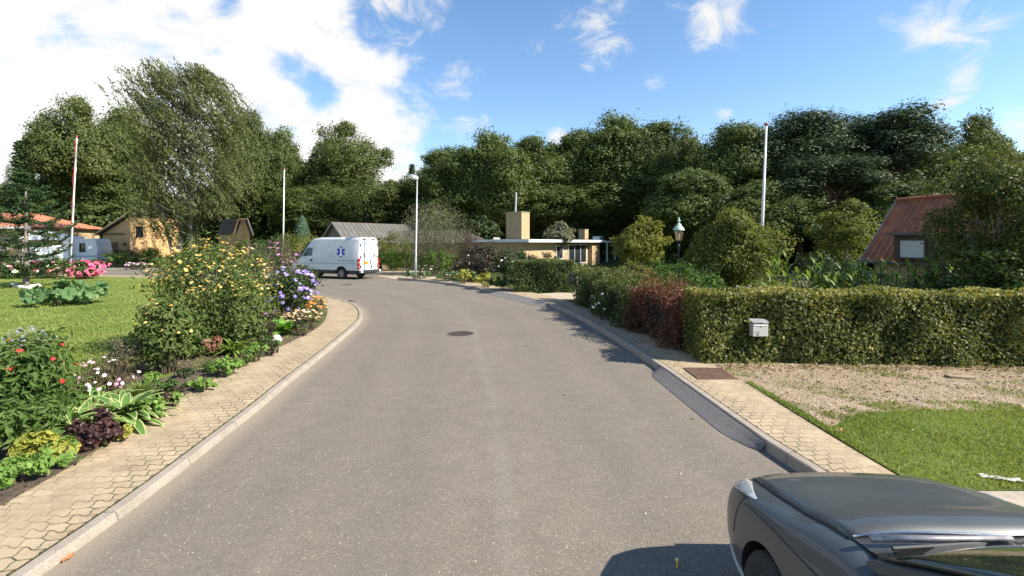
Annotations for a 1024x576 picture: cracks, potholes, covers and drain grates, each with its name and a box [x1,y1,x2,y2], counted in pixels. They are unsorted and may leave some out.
manhole cover [683,368,738,380]
